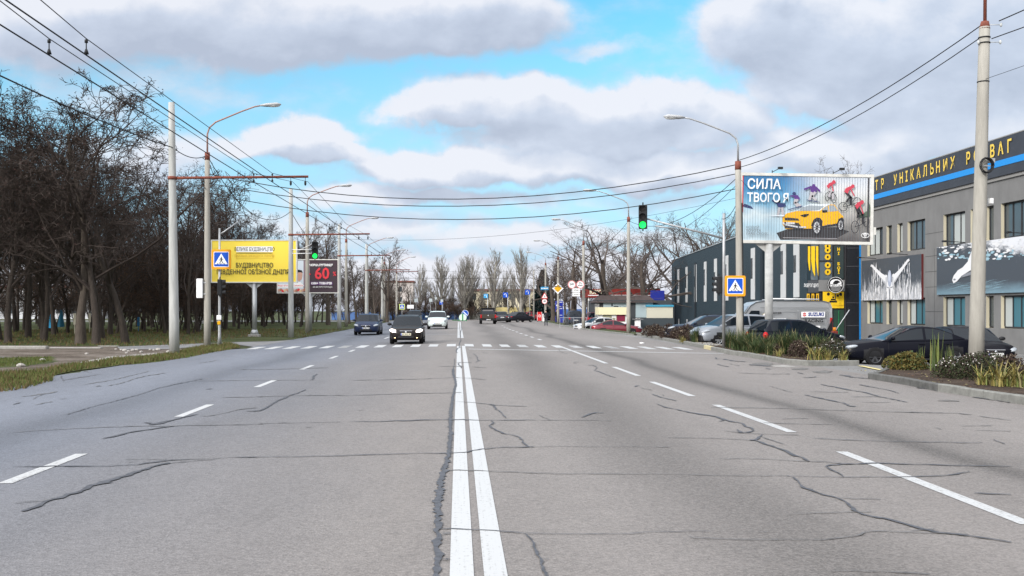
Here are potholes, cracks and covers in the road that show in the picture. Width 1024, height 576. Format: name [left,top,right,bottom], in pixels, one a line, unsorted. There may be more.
crack [20,324,550,438]
crack [793,497,875,514]
crack [31,357,1009,477]
